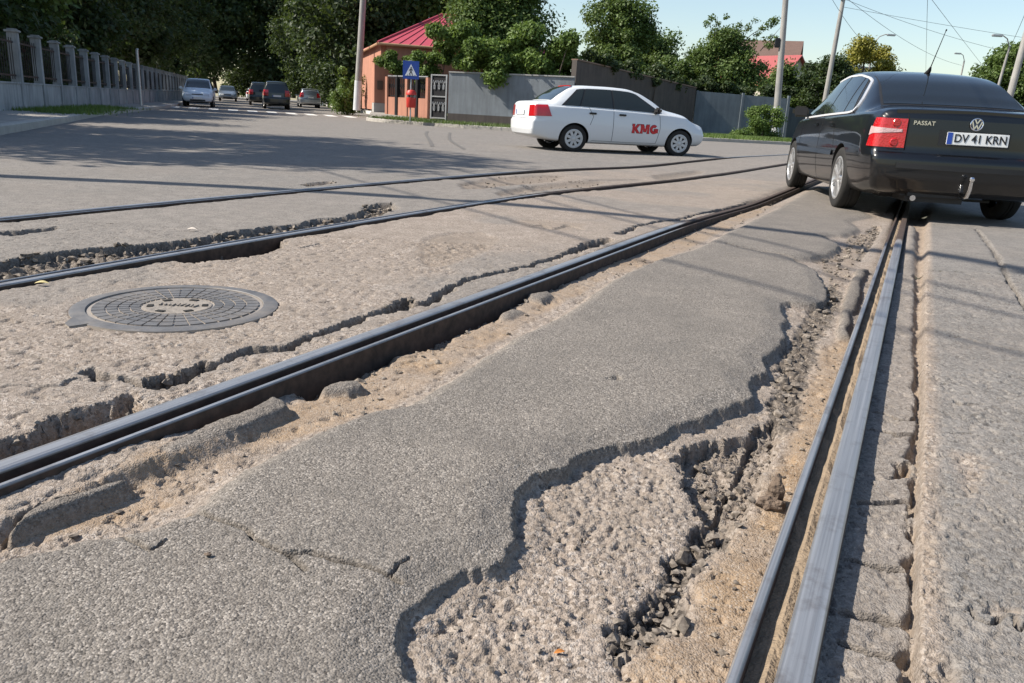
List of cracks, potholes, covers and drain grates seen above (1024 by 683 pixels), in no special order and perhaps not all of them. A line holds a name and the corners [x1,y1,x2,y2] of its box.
pothole [598,524,737,677]
pothole [0,203,402,280]
manhole cover [65,285,278,334]
crack [123,536,169,552]
crack [189,510,413,586]
crack [0,198,785,405]
pothole [669,417,786,542]
pothole [418,428,691,683]
pothole [0,390,149,460]
